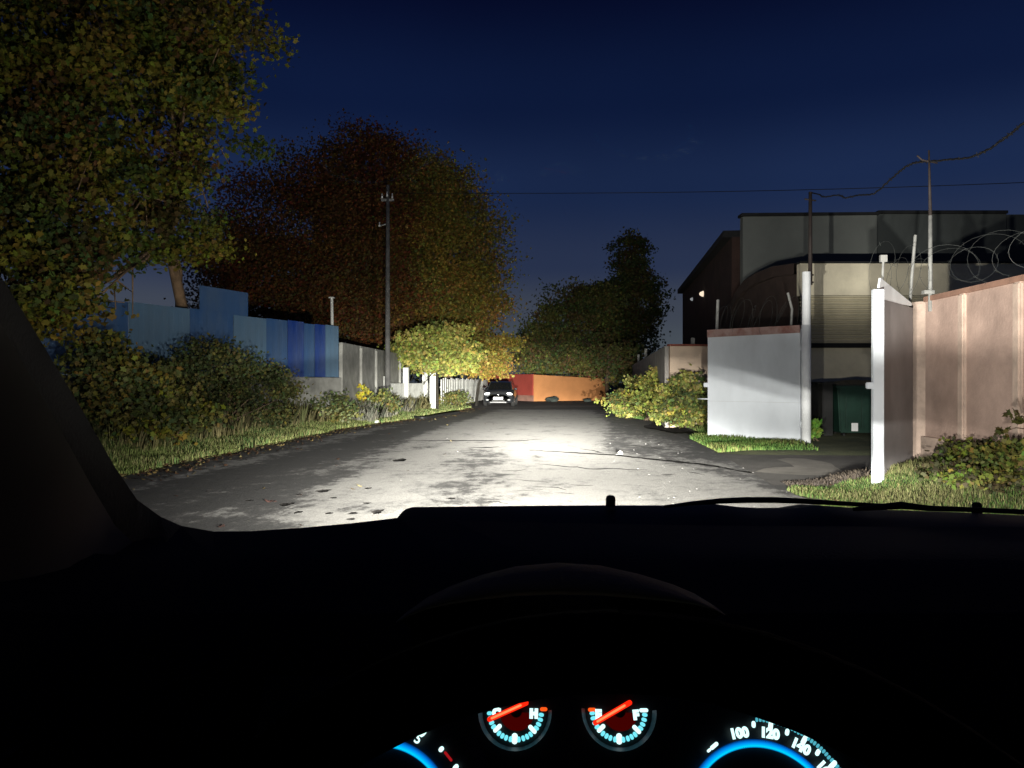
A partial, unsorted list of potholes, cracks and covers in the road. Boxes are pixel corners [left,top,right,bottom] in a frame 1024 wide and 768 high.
crack [400,439,753,494]
